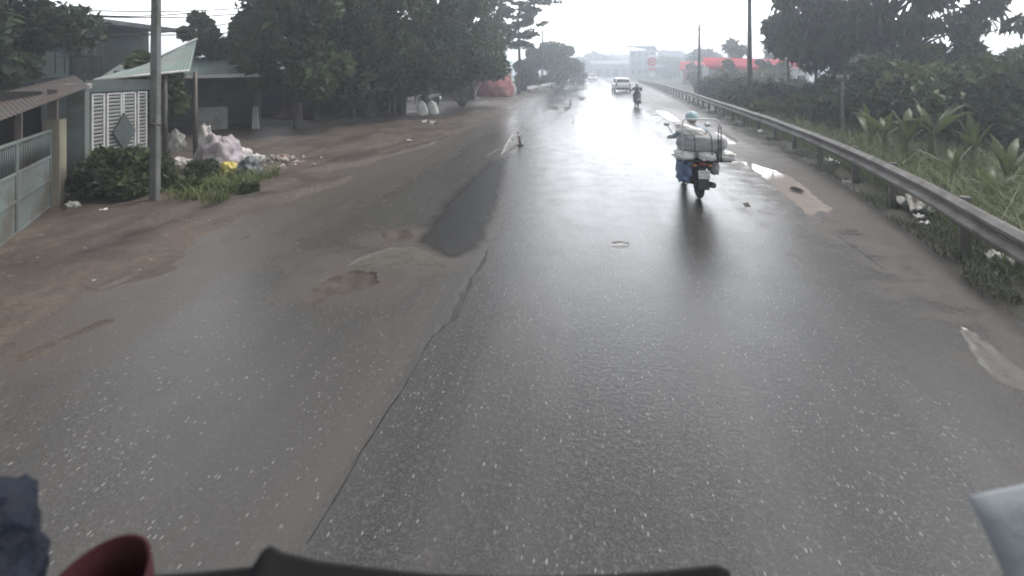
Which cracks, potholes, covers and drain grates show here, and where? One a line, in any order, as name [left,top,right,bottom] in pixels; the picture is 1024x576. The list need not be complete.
pothole [378,228,416,244]
pothole [609,241,630,250]
pothole [302,270,380,307]
